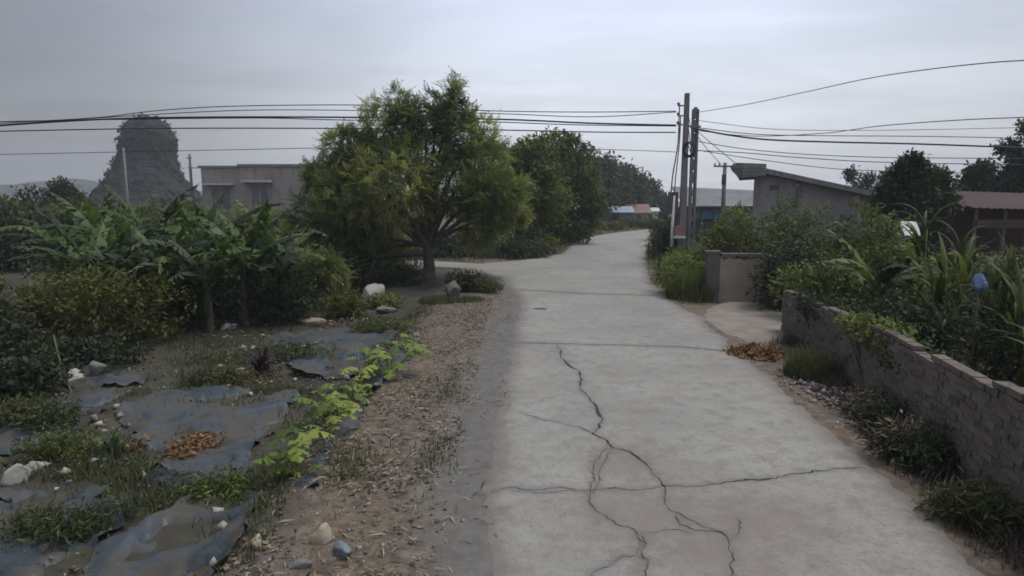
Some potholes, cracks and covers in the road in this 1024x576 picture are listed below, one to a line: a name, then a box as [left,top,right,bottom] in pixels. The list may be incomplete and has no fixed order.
crack [489,343,866,576]
